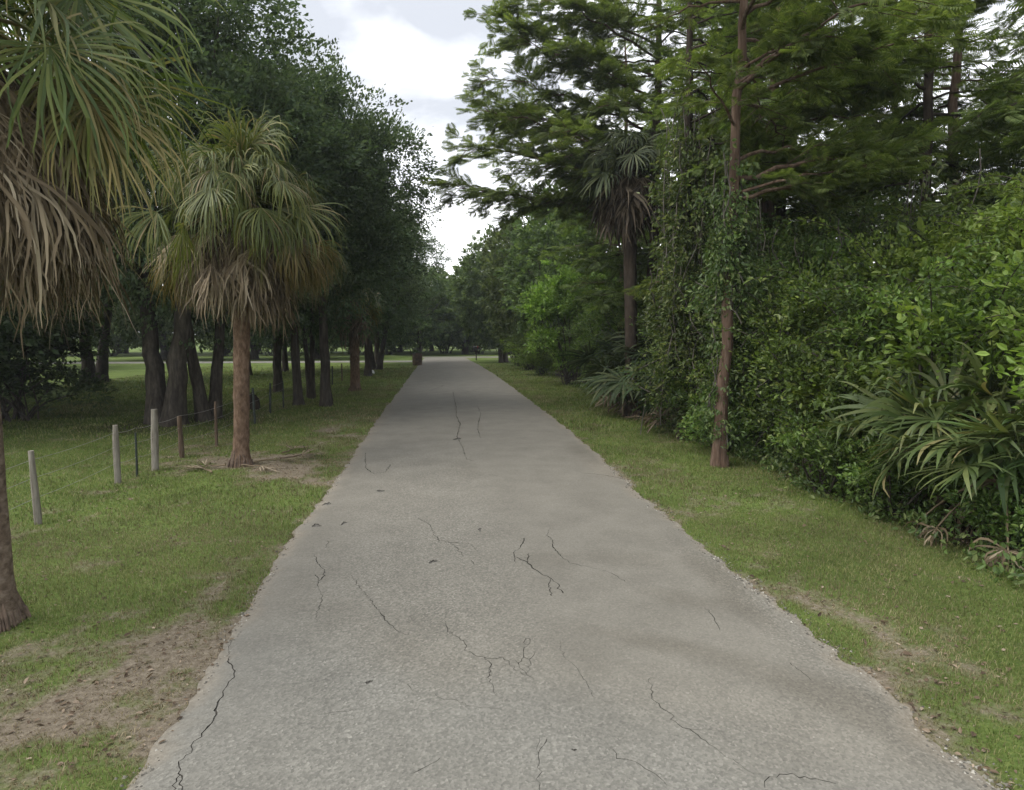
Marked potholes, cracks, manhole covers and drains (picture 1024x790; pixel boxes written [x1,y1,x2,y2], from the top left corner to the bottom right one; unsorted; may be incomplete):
crack [172,642,236,790]
crack [648,678,754,774]
crack [513,530,625,596]
crack [443,619,535,702]
crack [351,575,411,636]
crack [315,542,329,620]
crack [764,773,836,788]
